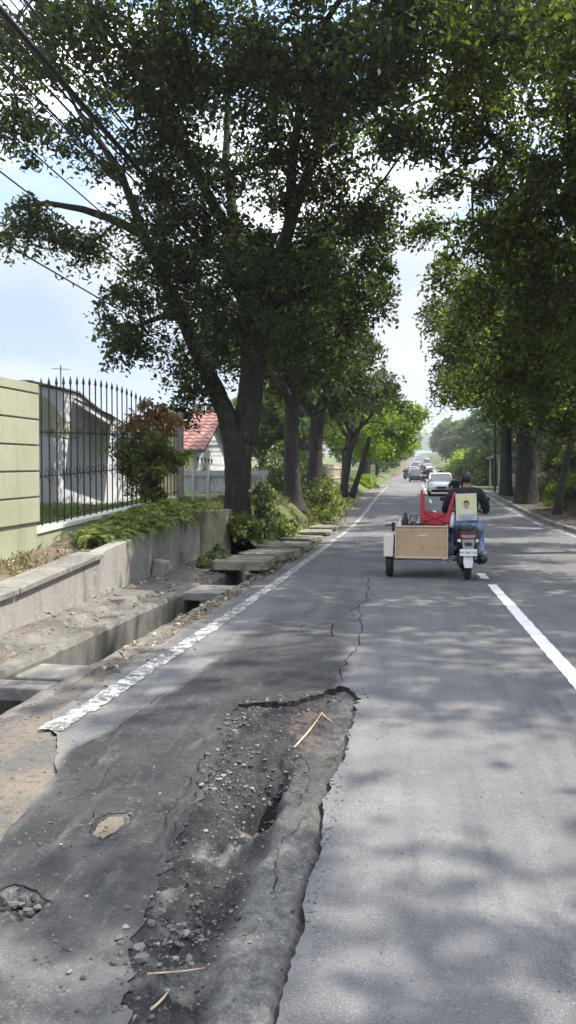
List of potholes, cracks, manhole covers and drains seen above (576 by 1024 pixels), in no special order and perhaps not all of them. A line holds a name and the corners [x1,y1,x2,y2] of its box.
pothole [120,685,362,1024]
crack [273,754,311,898]
crack [64,692,166,753]
crack [301,579,370,682]
pothole [88,813,131,841]
pothole [0,883,52,923]
